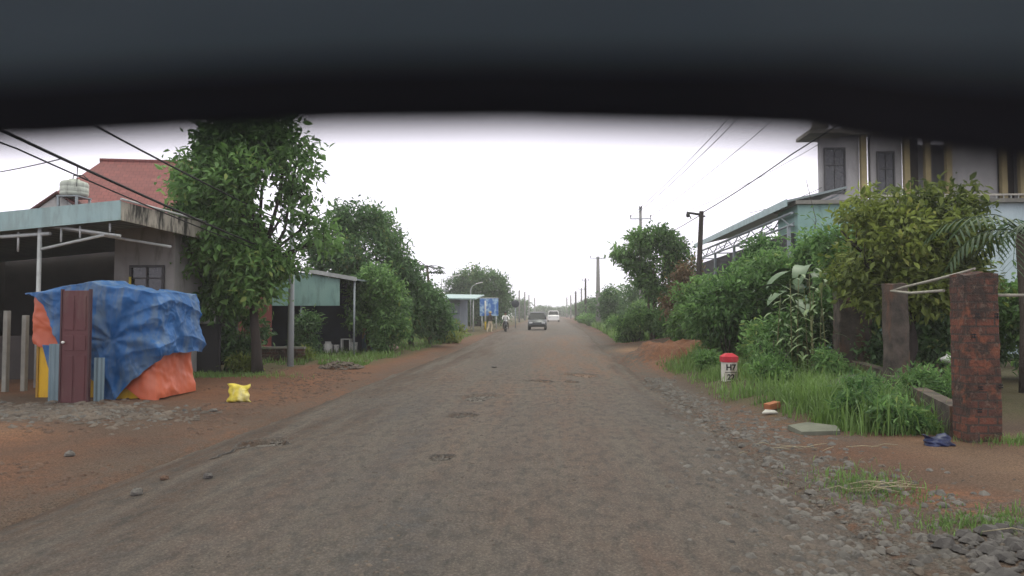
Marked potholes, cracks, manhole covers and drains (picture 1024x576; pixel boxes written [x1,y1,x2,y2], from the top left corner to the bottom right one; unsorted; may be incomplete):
pothole [457,393,503,402]
pothole [232,437,292,448]
